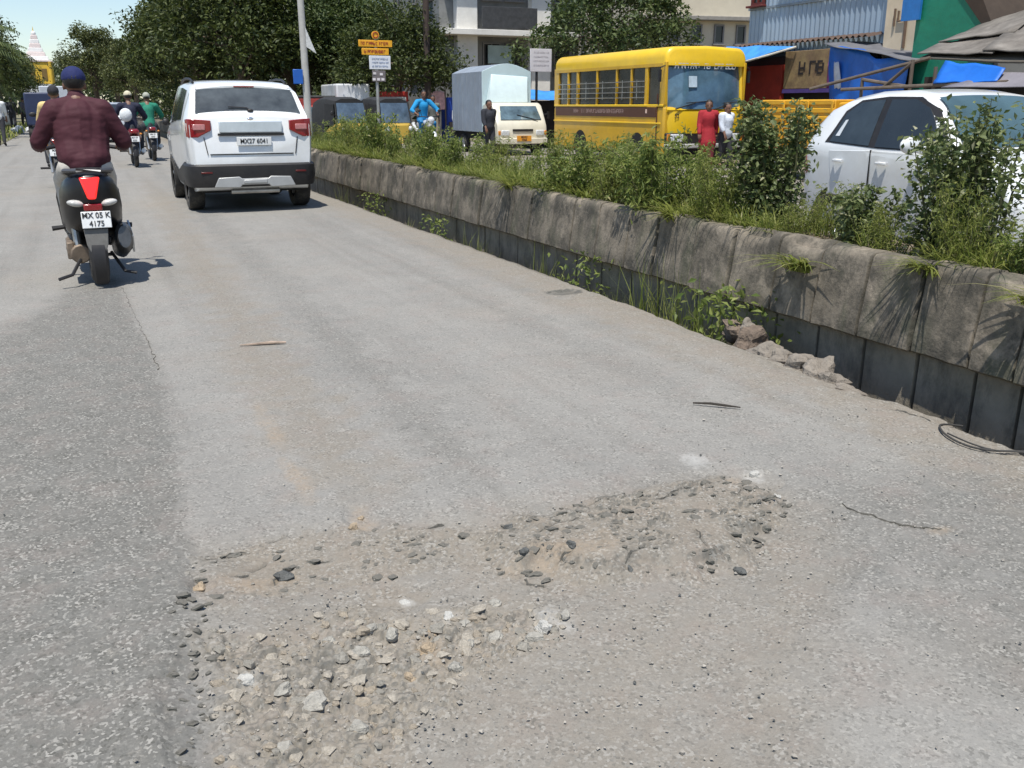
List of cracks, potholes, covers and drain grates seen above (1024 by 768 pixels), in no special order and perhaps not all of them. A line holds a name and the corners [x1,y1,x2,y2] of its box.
pothole [150,654,222,768]
pothole [464,474,787,588]
pothole [184,522,464,616]
pothole [177,596,568,768]
crack [842,503,942,530]
